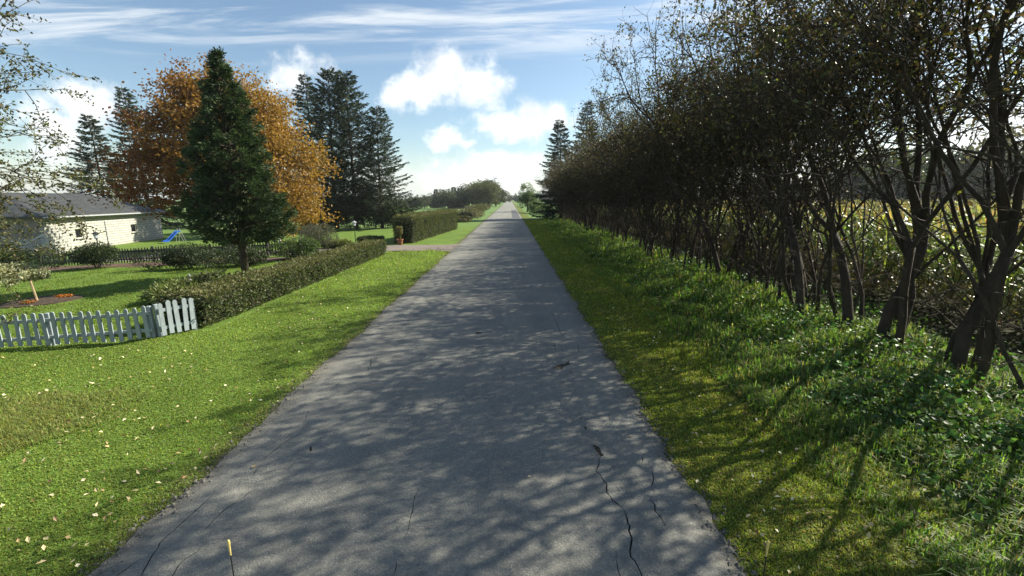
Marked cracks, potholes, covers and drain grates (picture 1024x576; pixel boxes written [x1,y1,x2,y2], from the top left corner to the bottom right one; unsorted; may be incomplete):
crack [121,494,247,573]
crack [596,456,663,576]
